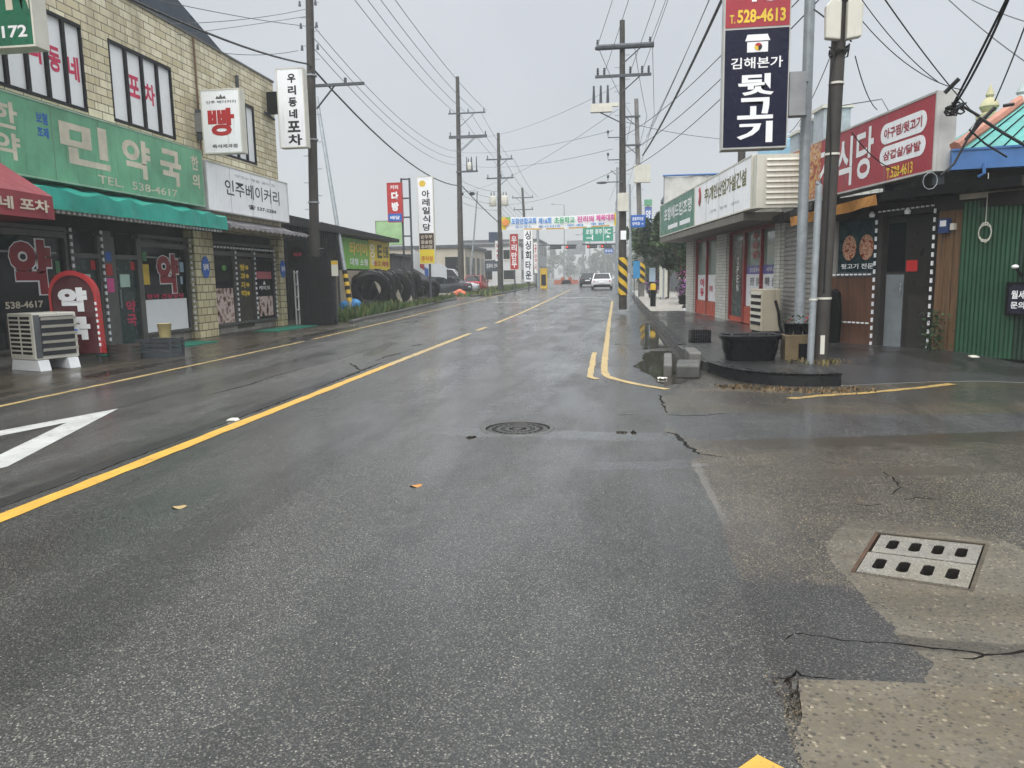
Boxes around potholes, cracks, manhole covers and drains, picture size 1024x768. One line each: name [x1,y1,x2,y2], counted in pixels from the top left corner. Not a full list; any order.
crack [784,633,1024,660]
crack [659,395,729,458]
pothole [772,677,803,723]
manhole cover [480,421,555,436]
